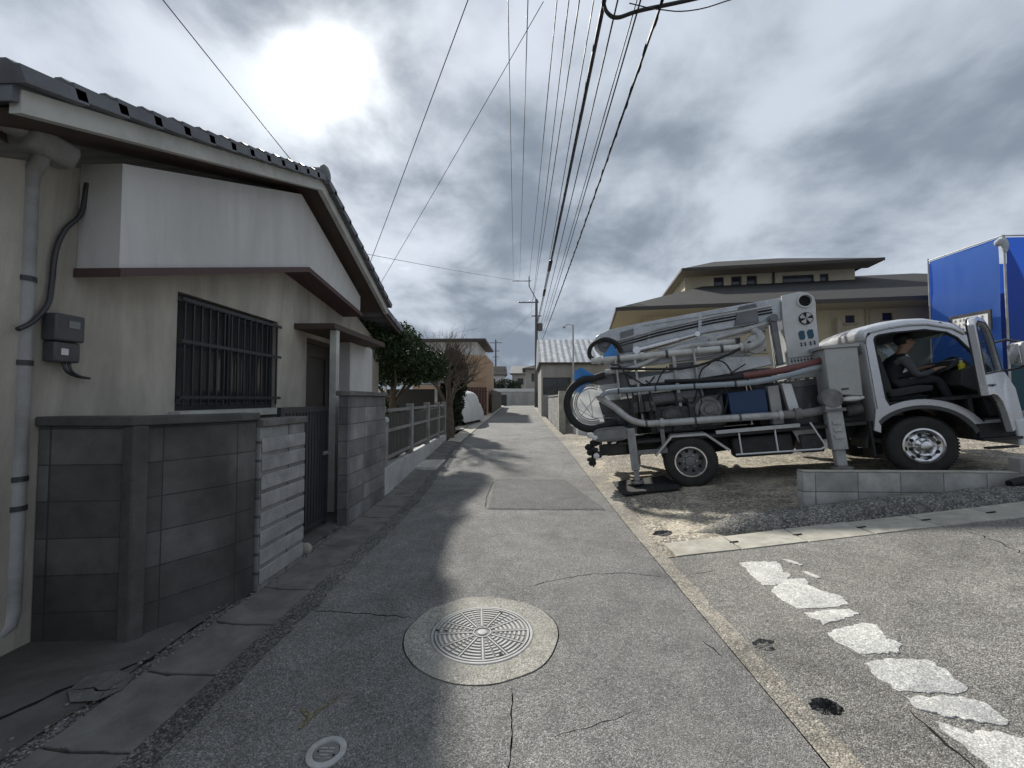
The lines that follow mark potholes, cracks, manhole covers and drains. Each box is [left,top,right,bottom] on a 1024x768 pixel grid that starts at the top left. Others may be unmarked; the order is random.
manhole cover [404,597,558,686]
pothole [752,638,778,652]
crack [910,711,975,768]
crack [552,709,635,737]
pothole [808,697,845,717]
utility cover [305,736,347,768]
